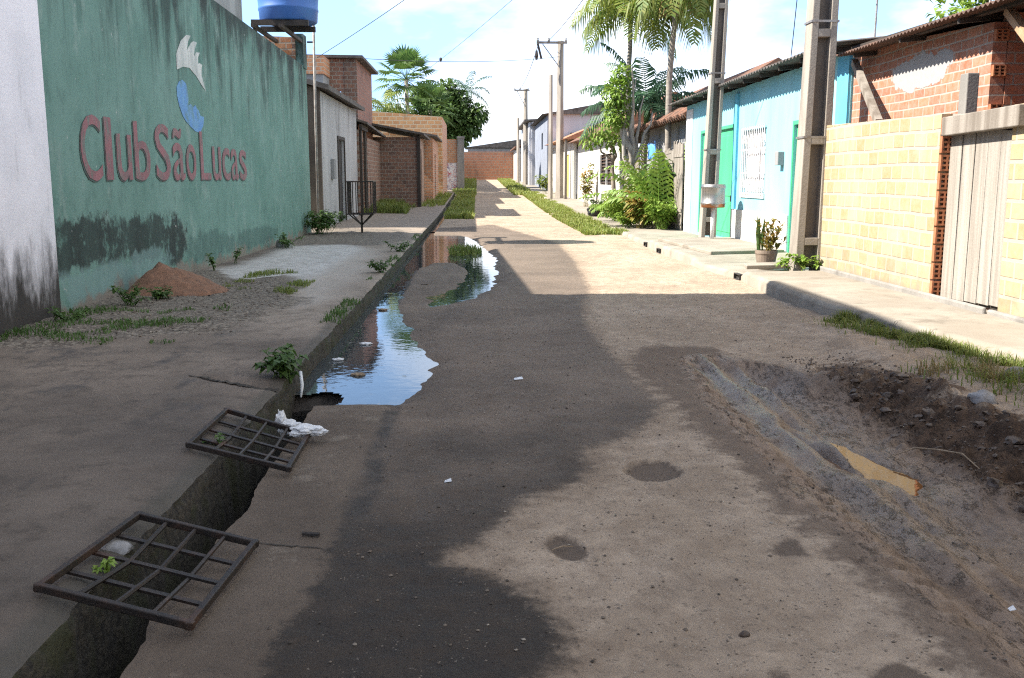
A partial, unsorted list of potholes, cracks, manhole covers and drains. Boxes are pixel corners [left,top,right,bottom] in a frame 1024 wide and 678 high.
pothole [676,353,1024,673]
crack [259,542,330,550]
drain grate [185,407,312,472]
pothole [621,460,685,482]
drain grate [33,511,259,631]
crack [189,375,280,393]
pothole [543,535,594,561]
